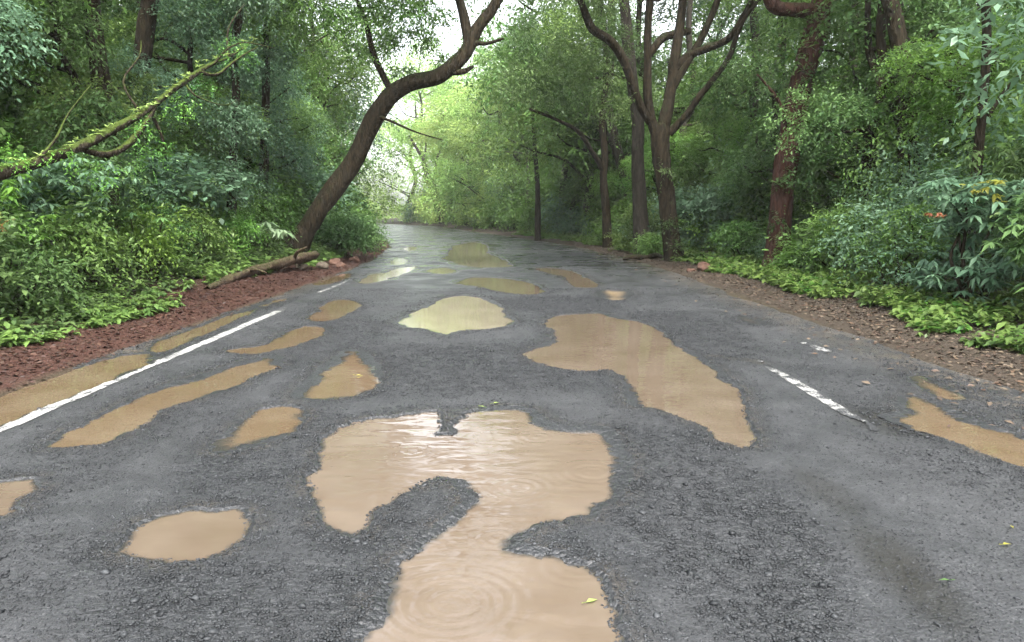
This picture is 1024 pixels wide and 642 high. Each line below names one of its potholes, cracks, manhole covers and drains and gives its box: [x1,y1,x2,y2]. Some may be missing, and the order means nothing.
pothole [356,266,420,284]
pothole [300,405,635,642]
pothole [0,352,158,427]
pothole [441,242,513,267]
pothole [111,505,257,564]
pothole [907,374,971,400]
pothole [519,311,763,448]
pothole [208,404,311,453]
pothole [290,348,385,401]
pothole [533,267,600,288]
pothole [453,277,547,294]
